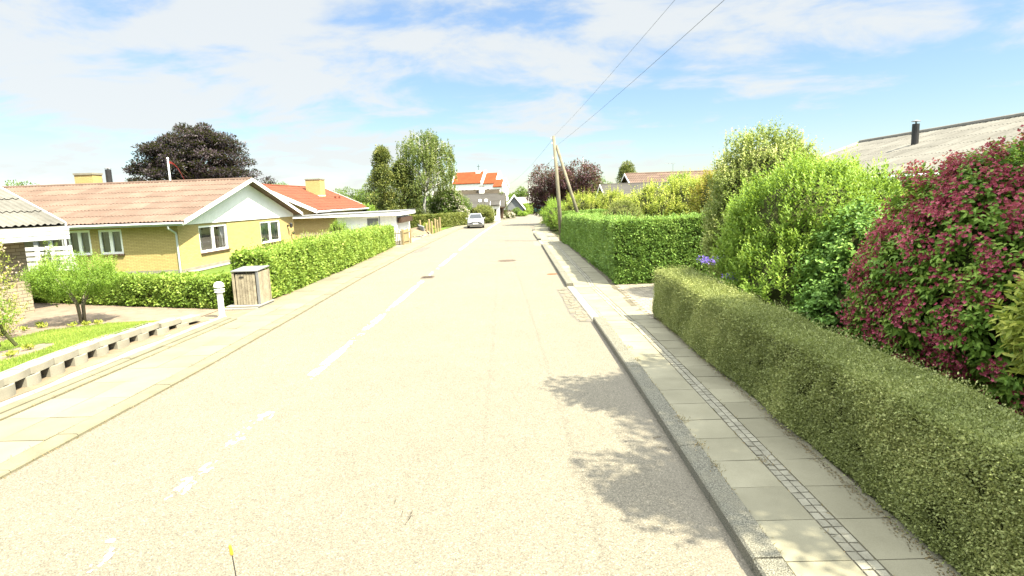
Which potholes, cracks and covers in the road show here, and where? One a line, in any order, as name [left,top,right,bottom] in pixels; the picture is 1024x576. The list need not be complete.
crack [393,499,414,525]
